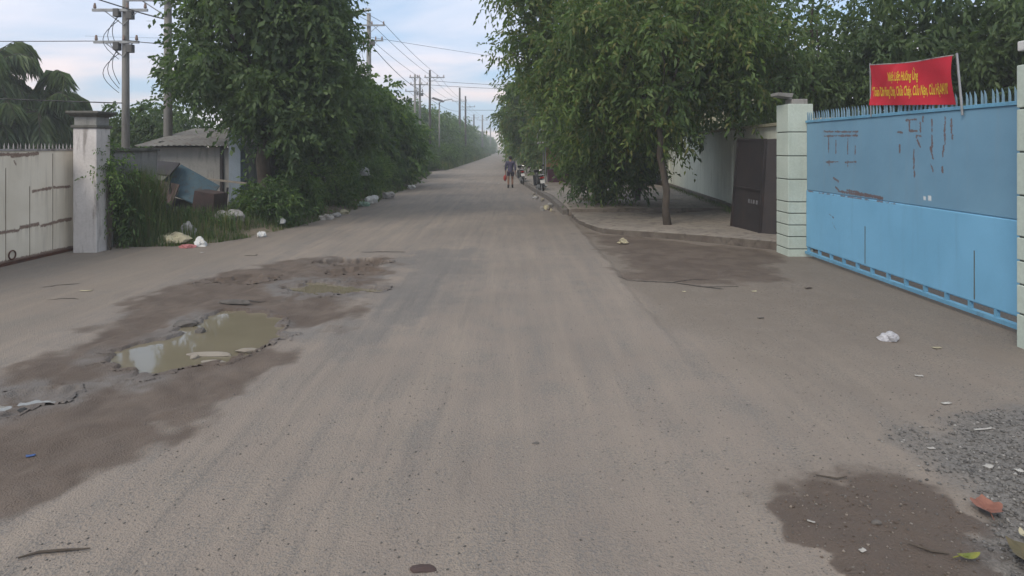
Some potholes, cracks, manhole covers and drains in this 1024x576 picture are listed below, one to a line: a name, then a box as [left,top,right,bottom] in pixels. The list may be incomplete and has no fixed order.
pothole [86,308,303,383]
pothole [0,381,87,420]
crack [617,276,738,289]
pothole [310,256,396,267]
pothole [322,266,393,276]
pothole [275,277,393,298]
